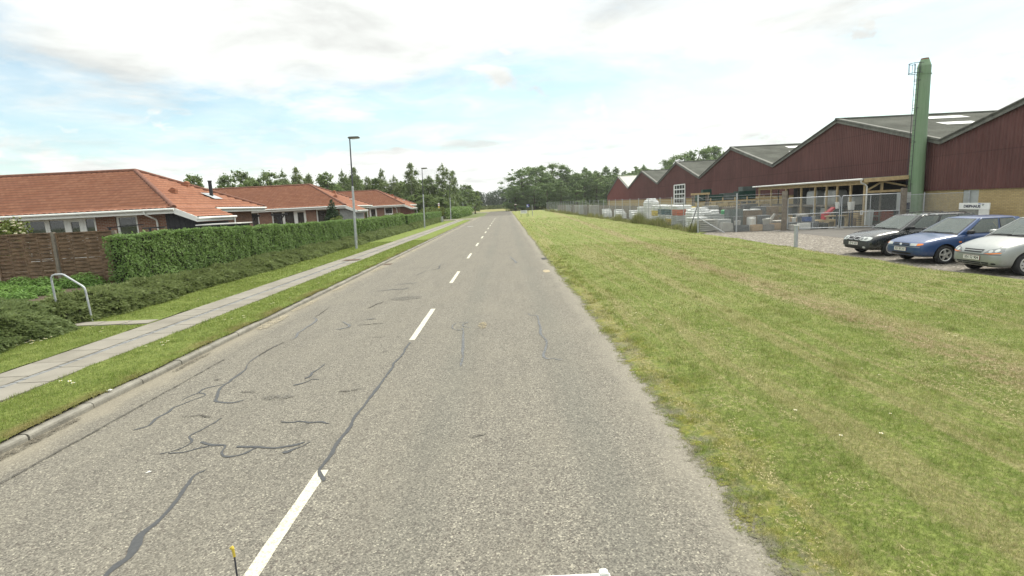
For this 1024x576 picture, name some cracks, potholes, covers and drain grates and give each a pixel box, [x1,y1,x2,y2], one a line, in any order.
crack [529,314,562,360]
crack [452,322,466,366]
crack [259,302,382,355]
